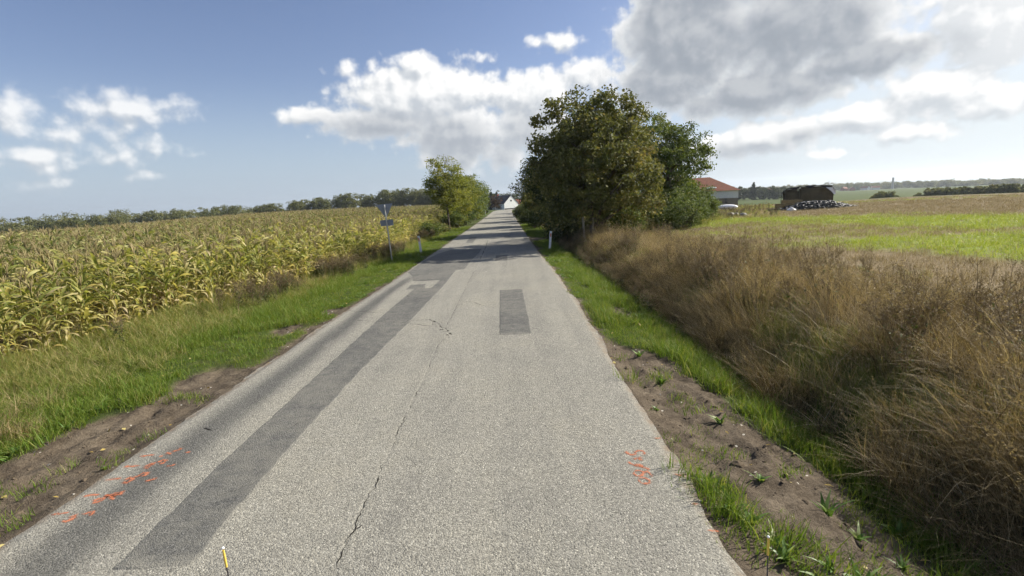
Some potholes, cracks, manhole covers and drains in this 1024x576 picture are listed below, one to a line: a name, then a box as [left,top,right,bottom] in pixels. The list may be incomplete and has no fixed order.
crack [336,311,451,568]
